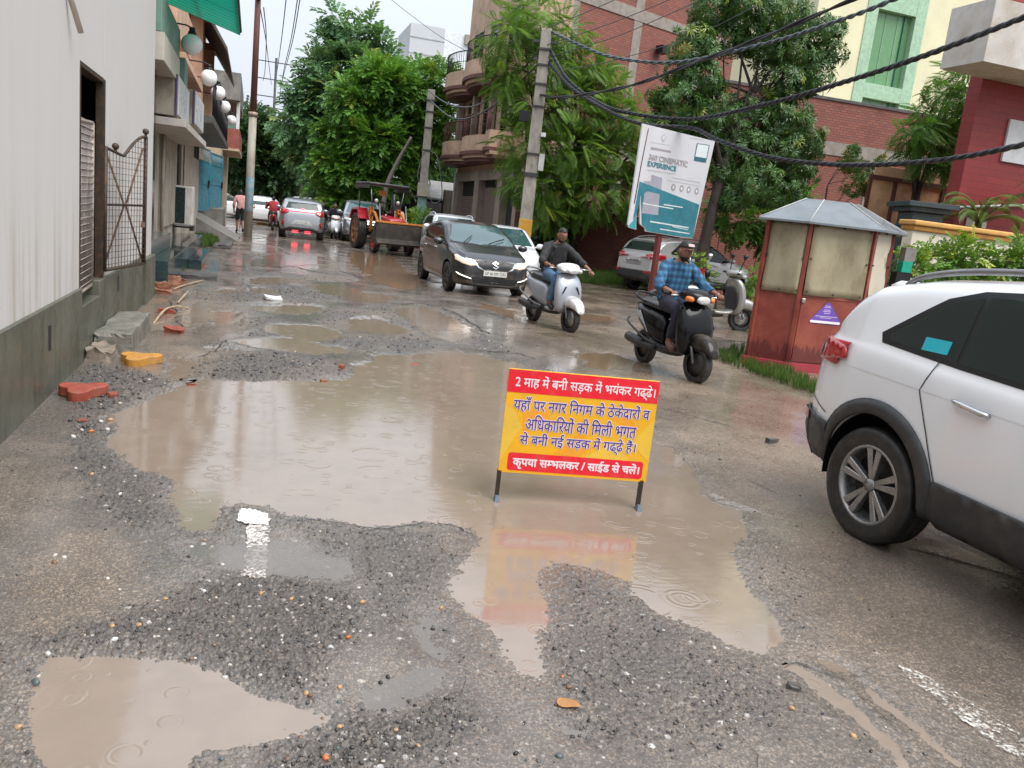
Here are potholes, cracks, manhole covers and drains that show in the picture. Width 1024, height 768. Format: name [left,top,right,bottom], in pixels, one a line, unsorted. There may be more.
pothole [101,349,794,683]
pothole [237,335,349,356]
pothole [13,646,350,768]
pothole [251,302,323,314]
pothole [774,657,917,768]
pothole [261,323,344,342]
